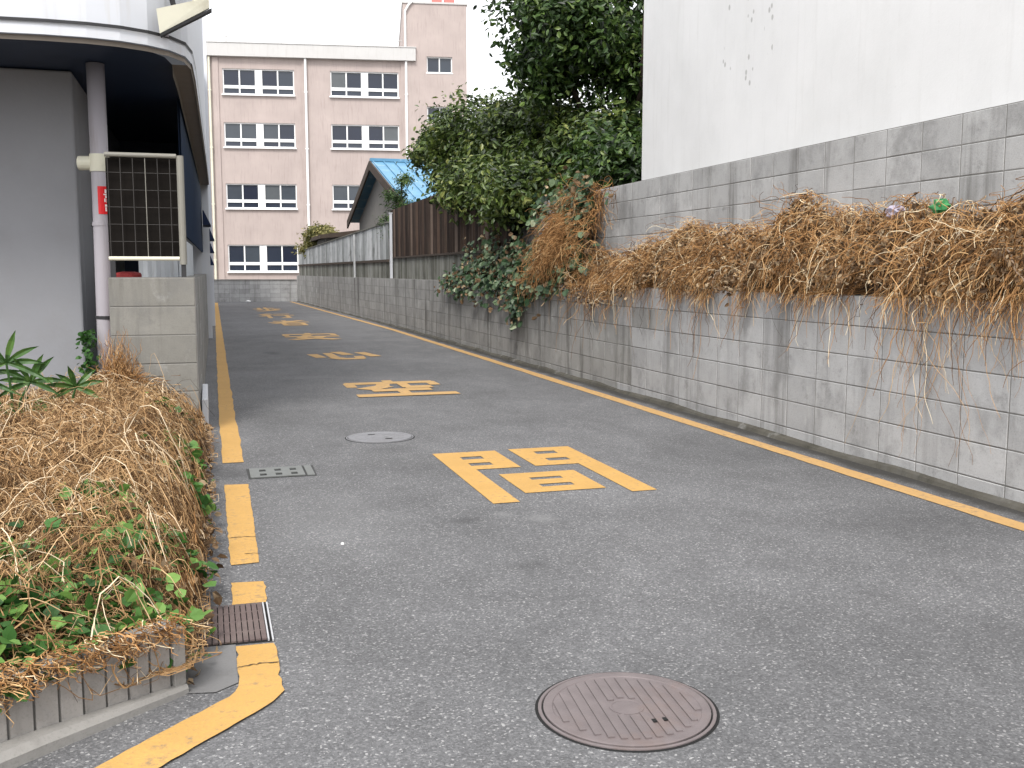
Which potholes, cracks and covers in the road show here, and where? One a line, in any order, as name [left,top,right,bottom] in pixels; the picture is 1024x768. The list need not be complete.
manhole cover [535,672,720,752]
manhole cover [345,431,415,443]
drain grate [192,602,274,648]
